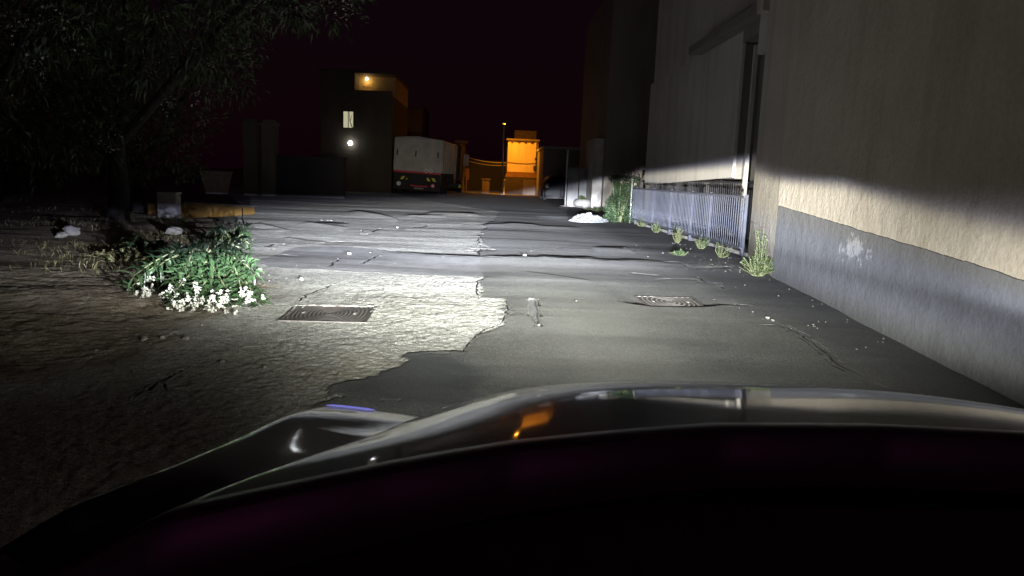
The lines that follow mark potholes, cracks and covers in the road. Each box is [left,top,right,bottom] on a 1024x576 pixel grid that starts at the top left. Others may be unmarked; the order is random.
crack [128,365,192,402]
crack [321,224,891,388]
crack [265,244,299,257]
